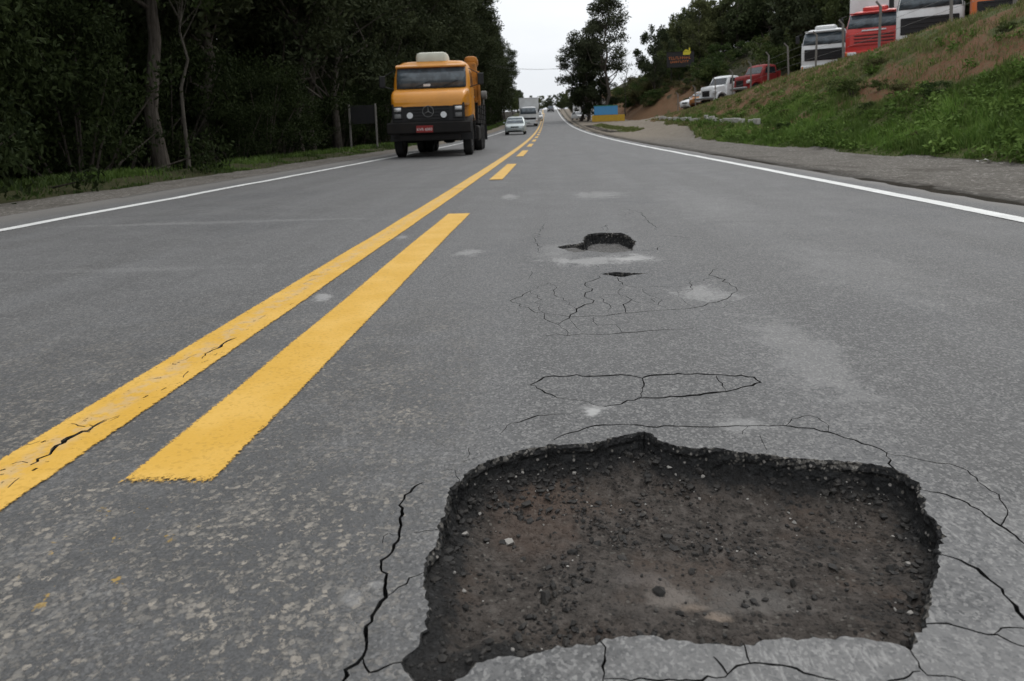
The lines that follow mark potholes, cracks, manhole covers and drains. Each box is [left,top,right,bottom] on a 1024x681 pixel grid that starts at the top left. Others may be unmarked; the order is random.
crack [510,263,737,336]
crack [501,373,1024,681]
crack [342,483,438,681]
pothole [558,233,636,253]
pothole [400,431,947,681]
